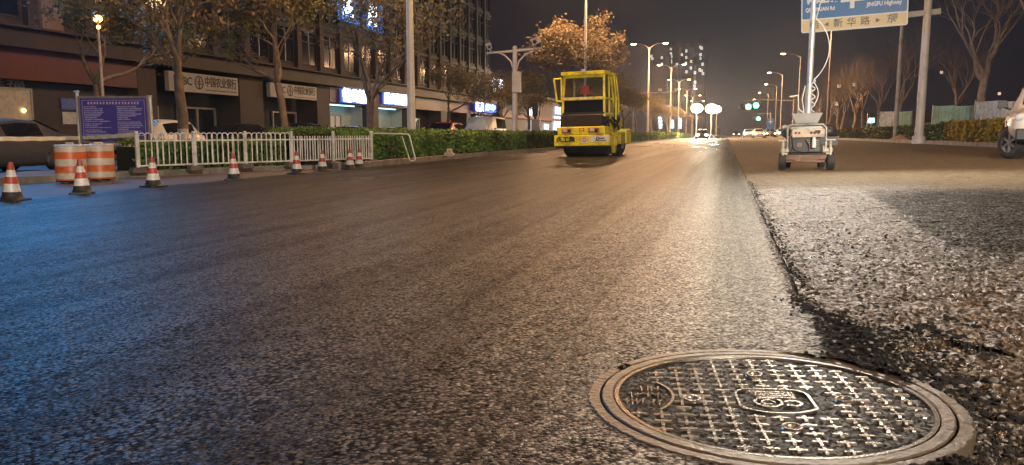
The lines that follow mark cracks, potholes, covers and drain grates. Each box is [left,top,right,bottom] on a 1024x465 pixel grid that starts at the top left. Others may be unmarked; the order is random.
crack [934,336,1015,358]
manhole cover [587,349,976,465]
